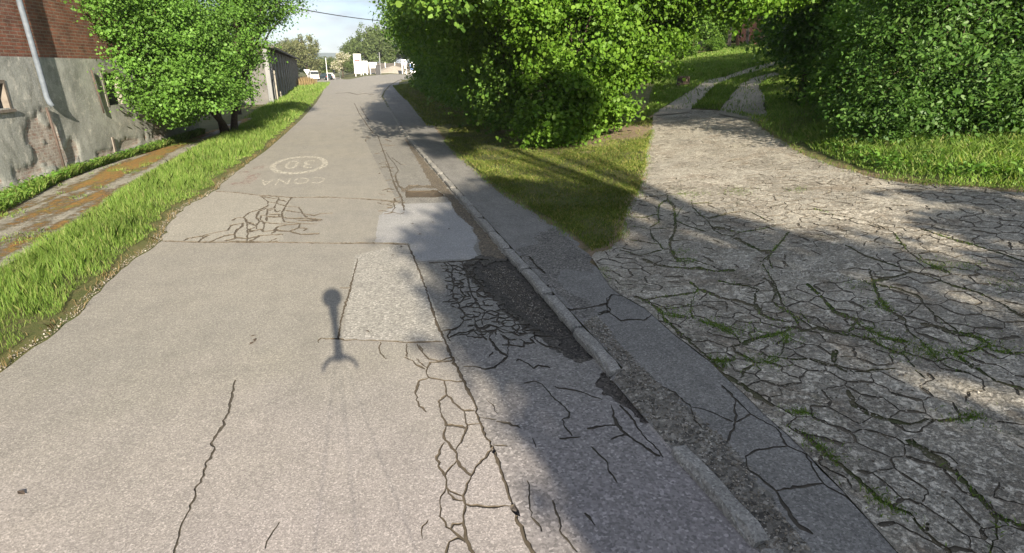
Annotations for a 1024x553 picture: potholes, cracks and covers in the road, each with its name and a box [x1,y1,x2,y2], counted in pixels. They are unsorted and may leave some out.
crack [173,380,236,553]
crack [183,196,328,243]
pothole [472,259,594,359]
pothole [595,372,649,424]
crack [318,111,1024,553]
